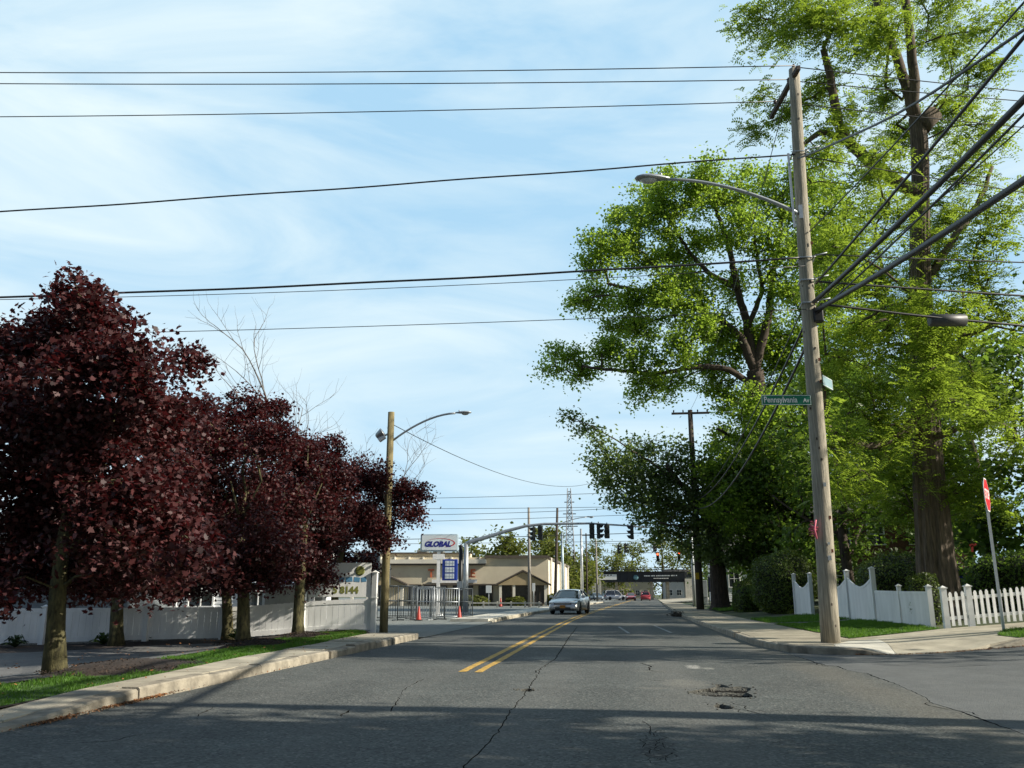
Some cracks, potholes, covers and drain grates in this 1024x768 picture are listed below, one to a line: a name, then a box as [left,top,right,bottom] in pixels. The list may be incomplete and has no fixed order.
pothole [685,683,757,699]
crack [463,631,574,768]
crack [636,723,680,765]
crack [793,655,1023,734]
